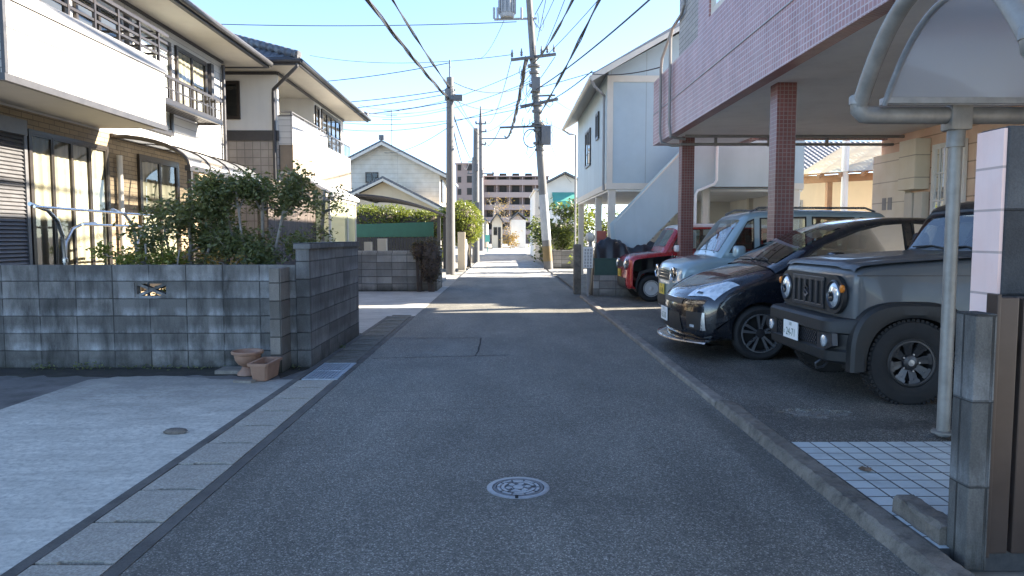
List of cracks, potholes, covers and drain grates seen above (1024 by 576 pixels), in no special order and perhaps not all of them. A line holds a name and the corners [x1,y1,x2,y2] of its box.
drain grate [301,363,356,380]
manhole cover [487,477,550,499]
